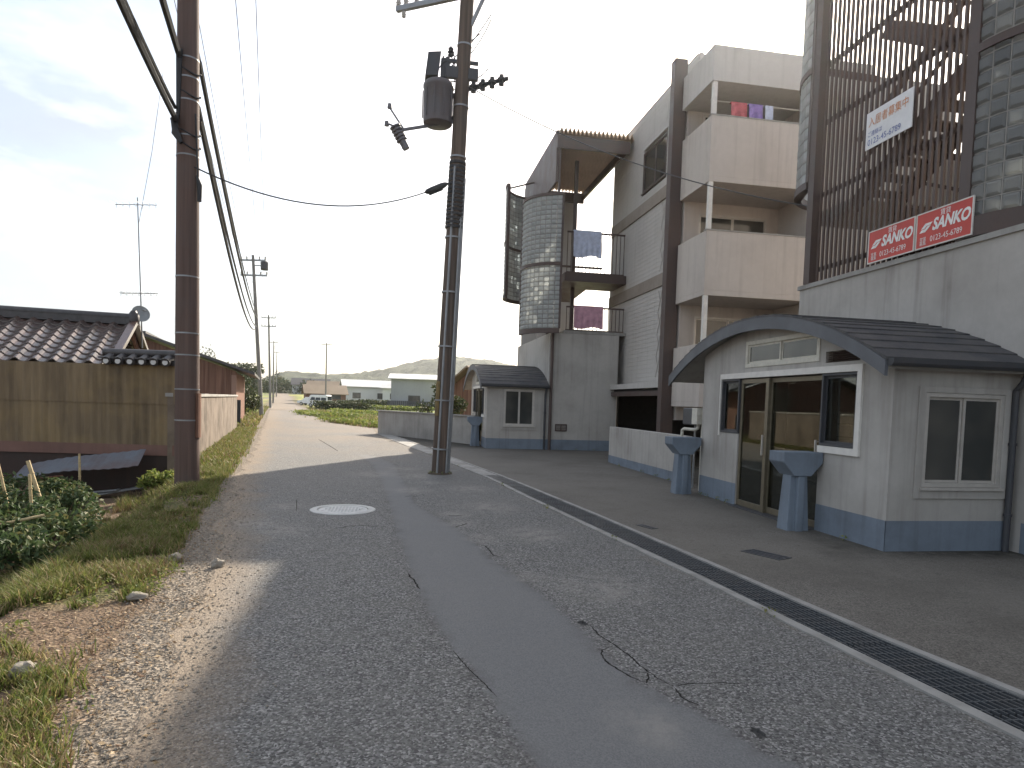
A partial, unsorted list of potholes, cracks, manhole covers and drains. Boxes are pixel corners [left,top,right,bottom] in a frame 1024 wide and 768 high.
manhole cover [310,504,376,515]
crack [590,625,740,706]
